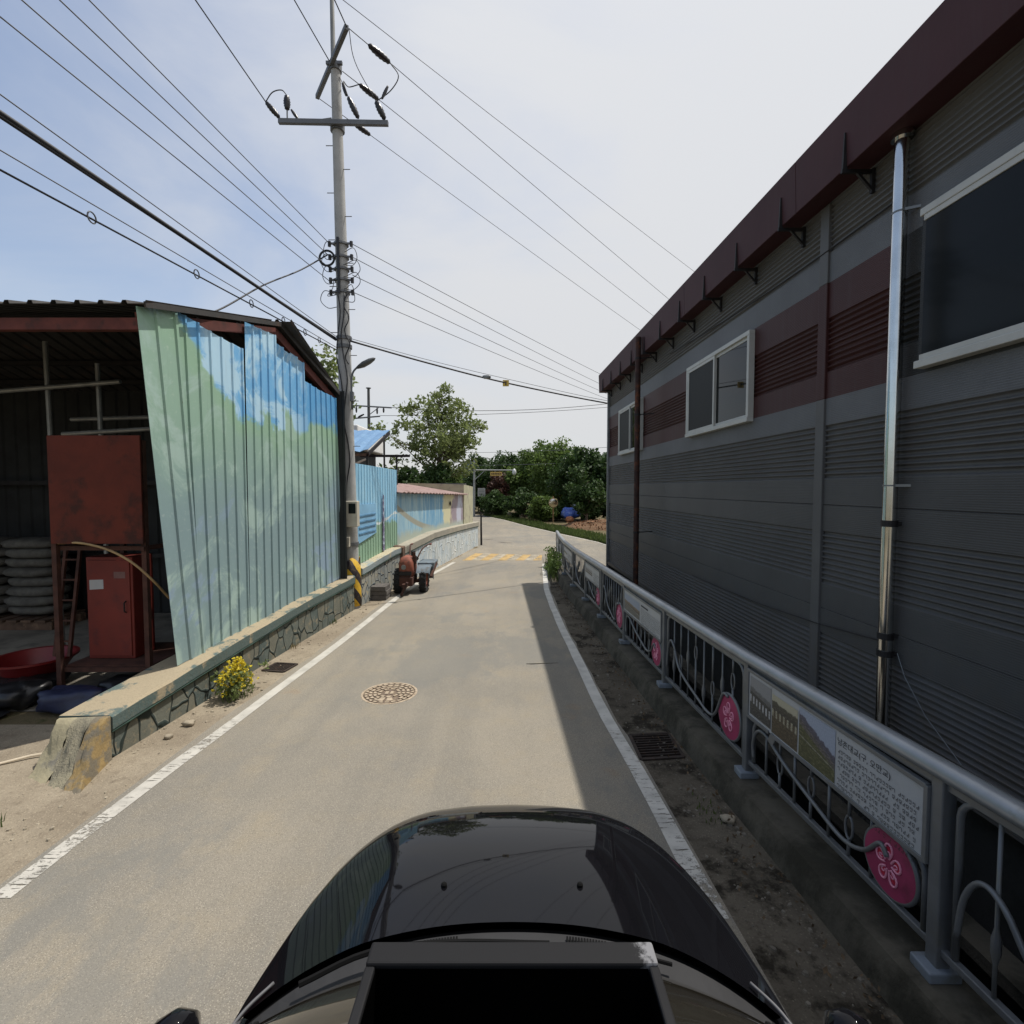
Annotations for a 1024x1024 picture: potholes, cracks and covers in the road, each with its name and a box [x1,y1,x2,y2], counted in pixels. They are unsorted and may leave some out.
drain grate [628,732,685,761]
manhole cover [361,682,417,705]
drain grate [261,662,298,673]
